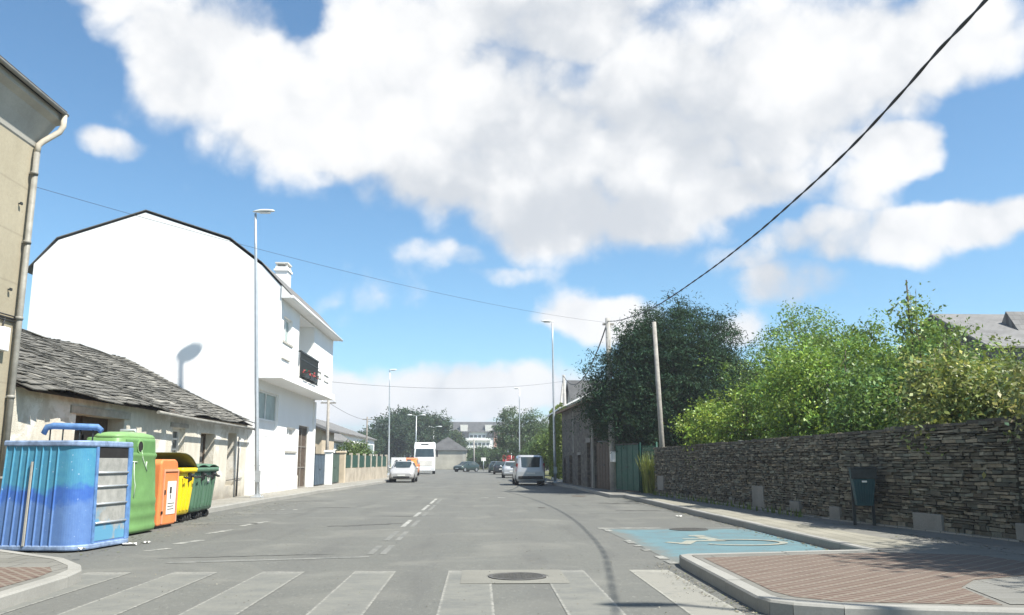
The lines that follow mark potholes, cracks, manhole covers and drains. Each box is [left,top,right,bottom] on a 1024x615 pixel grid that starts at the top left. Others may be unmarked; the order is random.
manhole cover [488,572,546,580]
